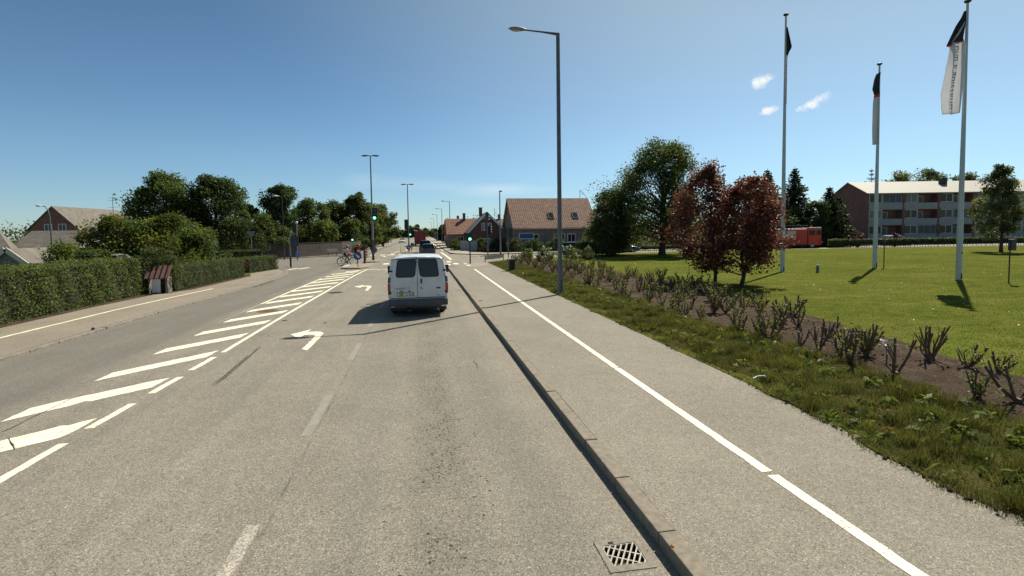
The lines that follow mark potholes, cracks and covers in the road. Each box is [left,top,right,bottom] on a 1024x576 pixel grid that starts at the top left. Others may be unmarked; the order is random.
drain grate [593,536,657,574]
